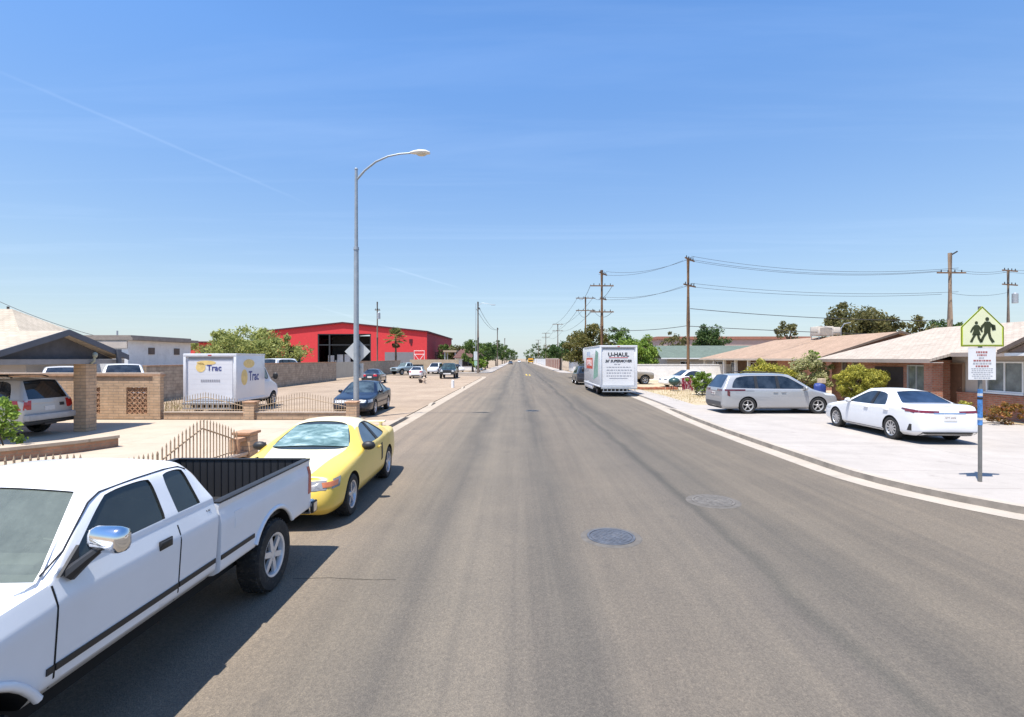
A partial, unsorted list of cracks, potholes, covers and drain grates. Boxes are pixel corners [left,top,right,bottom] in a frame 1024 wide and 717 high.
manhole cover [686,494,742,509]
manhole cover [580,527,642,548]
